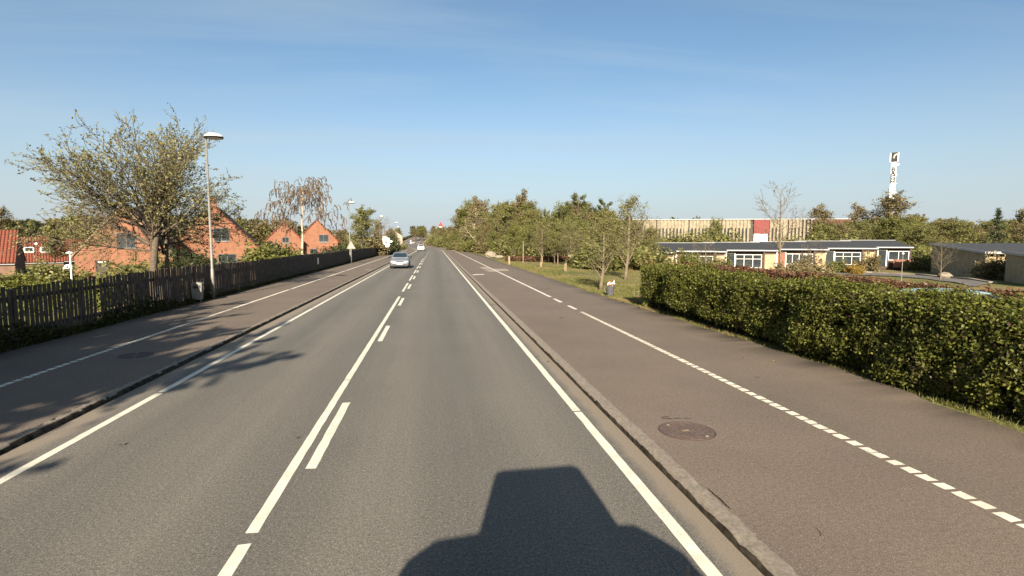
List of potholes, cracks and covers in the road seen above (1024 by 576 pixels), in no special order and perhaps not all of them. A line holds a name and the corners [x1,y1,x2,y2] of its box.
manhole cover [658,421,717,441]
